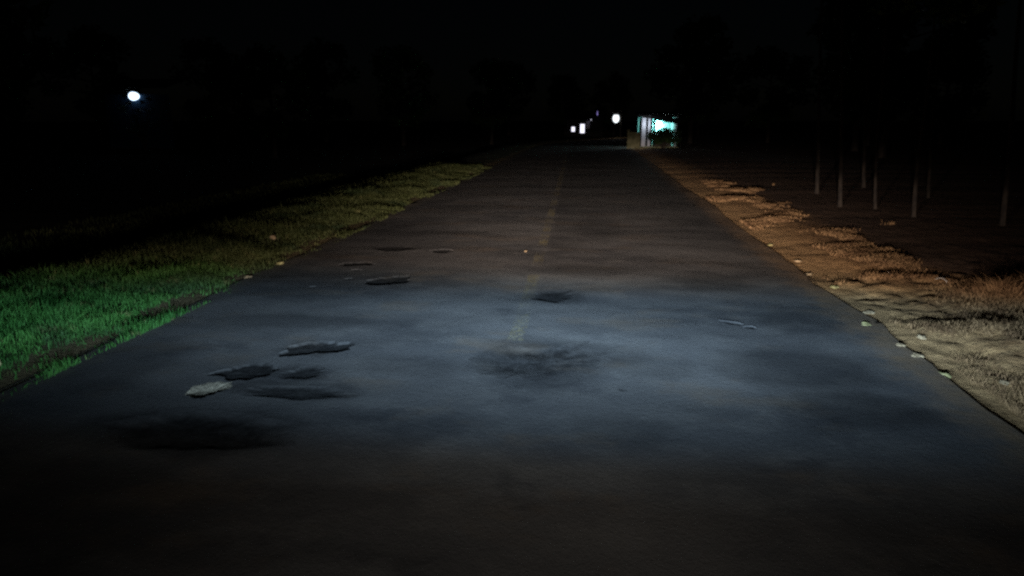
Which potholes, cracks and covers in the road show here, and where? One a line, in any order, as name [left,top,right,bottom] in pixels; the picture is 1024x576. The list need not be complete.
pothole [467,341,615,383]
pothole [277,364,328,380]
pothole [277,341,355,357]
pothole [207,363,280,381]
pothole [93,407,302,452]
pothole [528,289,578,304]
crack [719,320,757,329]
pothole [238,385,363,401]
pothole [363,275,412,286]
